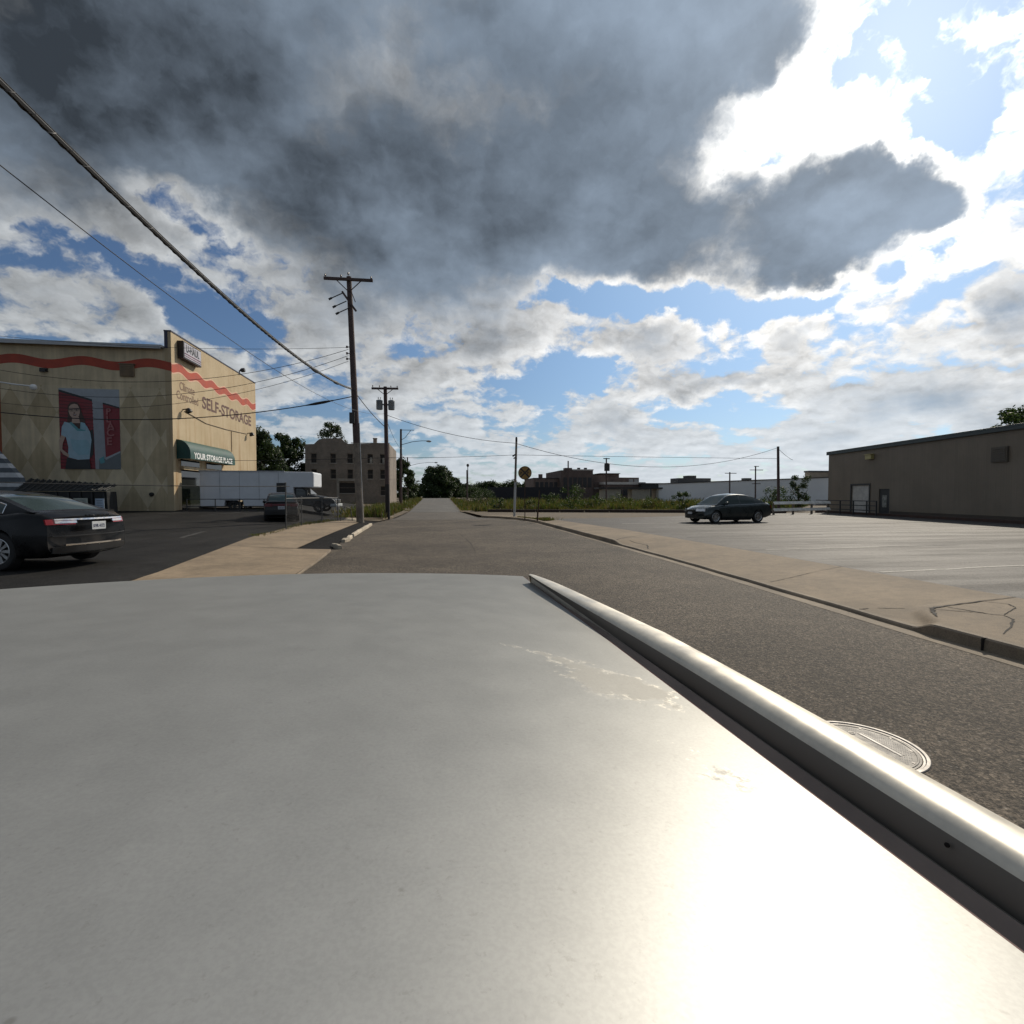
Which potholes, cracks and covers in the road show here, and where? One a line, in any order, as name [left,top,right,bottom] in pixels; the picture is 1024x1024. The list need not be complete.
crack [929,597,1016,634]
manhole cover [828,721,932,774]
